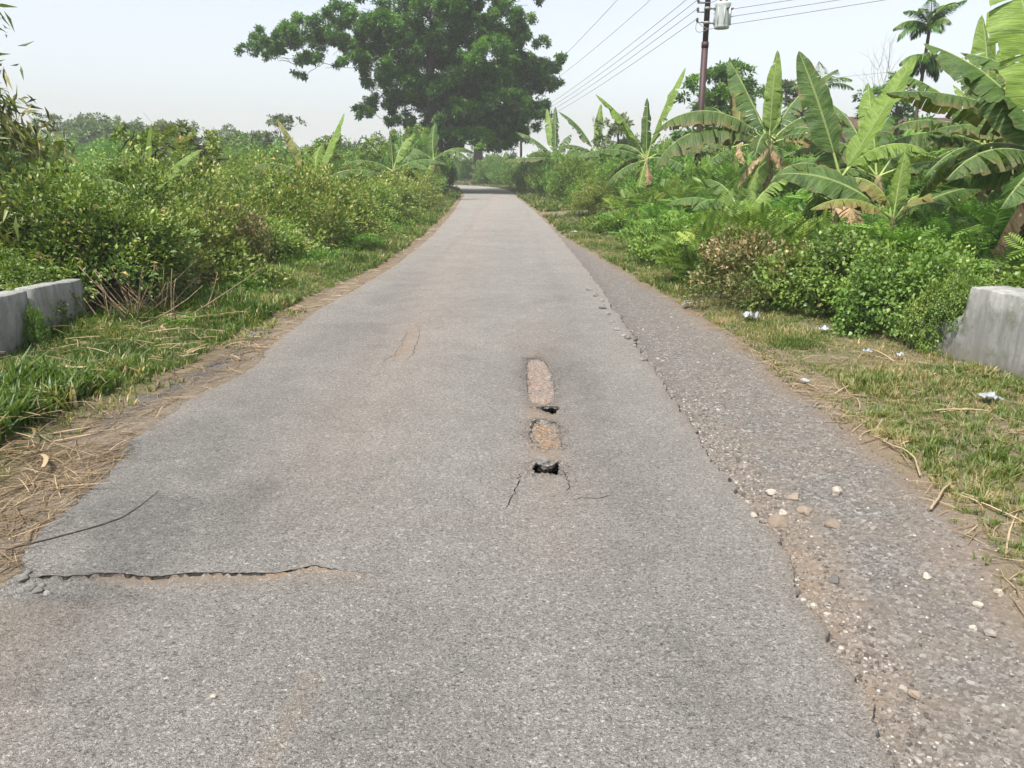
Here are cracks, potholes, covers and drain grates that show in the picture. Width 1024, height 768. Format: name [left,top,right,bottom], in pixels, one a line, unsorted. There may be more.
crack [33,565,370,581]
